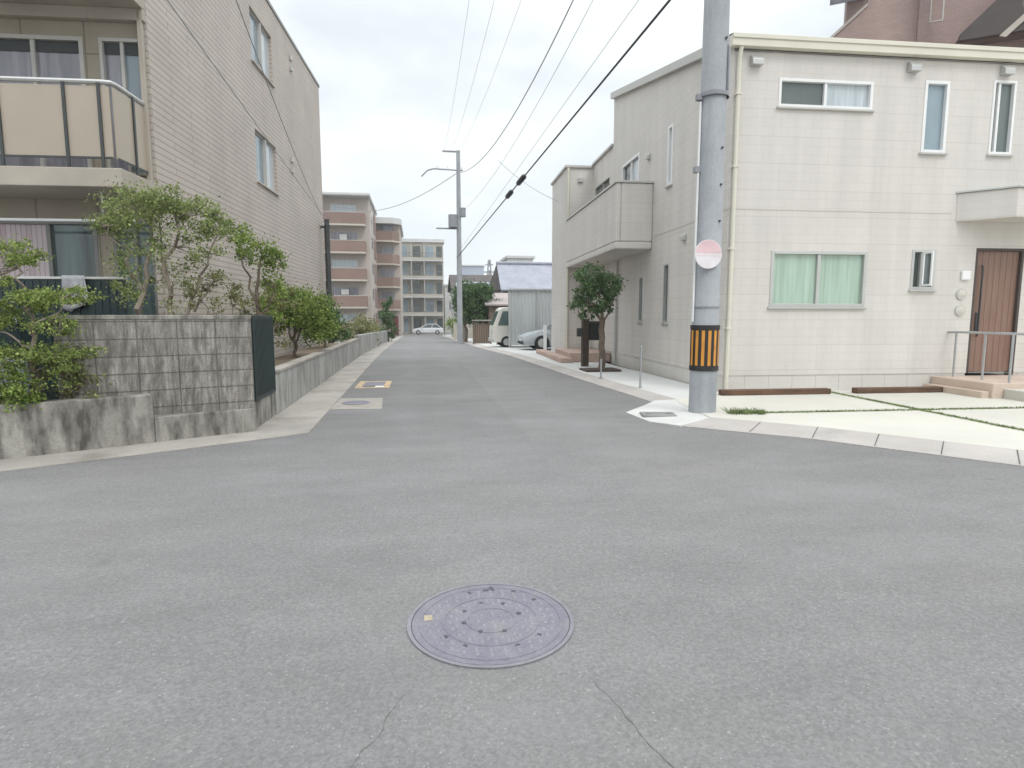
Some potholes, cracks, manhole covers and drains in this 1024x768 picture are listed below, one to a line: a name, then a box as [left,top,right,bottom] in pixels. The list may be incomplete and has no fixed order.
manhole cover [407,583,574,669]
manhole cover [331,398,383,409]
crack [593,680,674,768]
